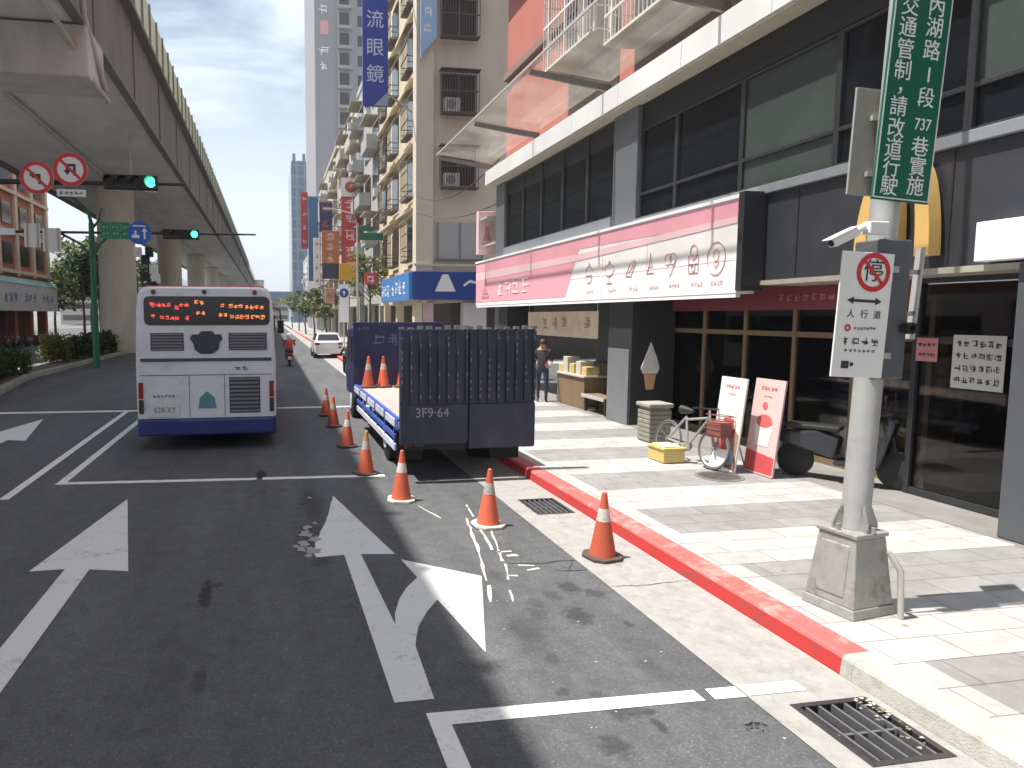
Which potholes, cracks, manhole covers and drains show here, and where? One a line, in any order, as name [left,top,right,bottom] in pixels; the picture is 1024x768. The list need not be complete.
manhole cover [694,471,745,482]
crack [522,560,586,571]
drain grate [518,498,575,530]
pothole [743,721,770,734]
drain grate [790,696,957,768]
